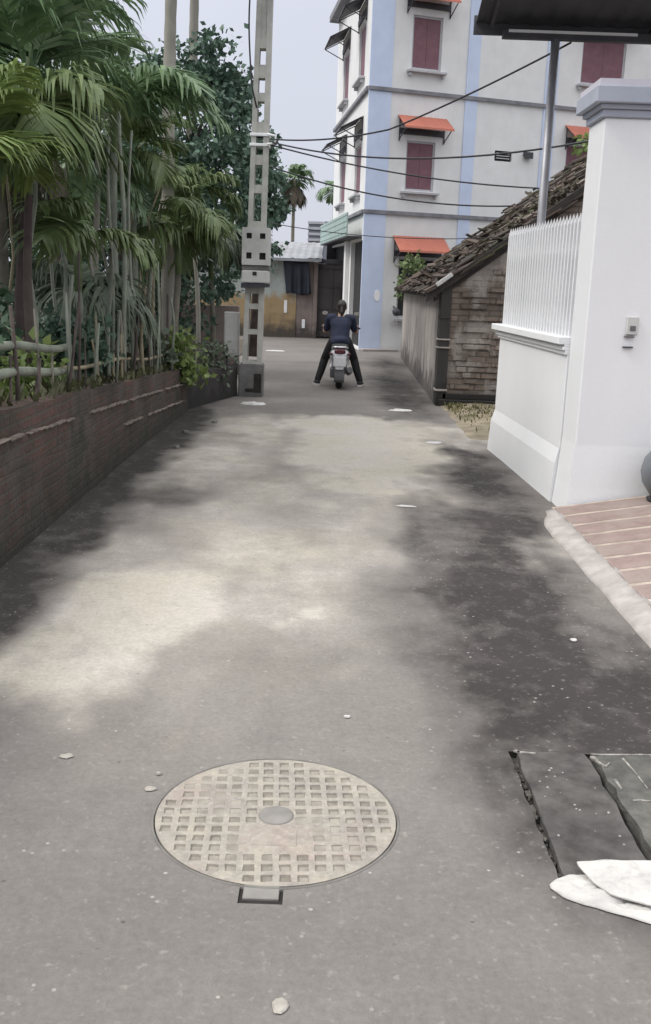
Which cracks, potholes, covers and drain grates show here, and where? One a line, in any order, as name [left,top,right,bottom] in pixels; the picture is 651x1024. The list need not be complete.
manhole cover [151,758,400,905]
